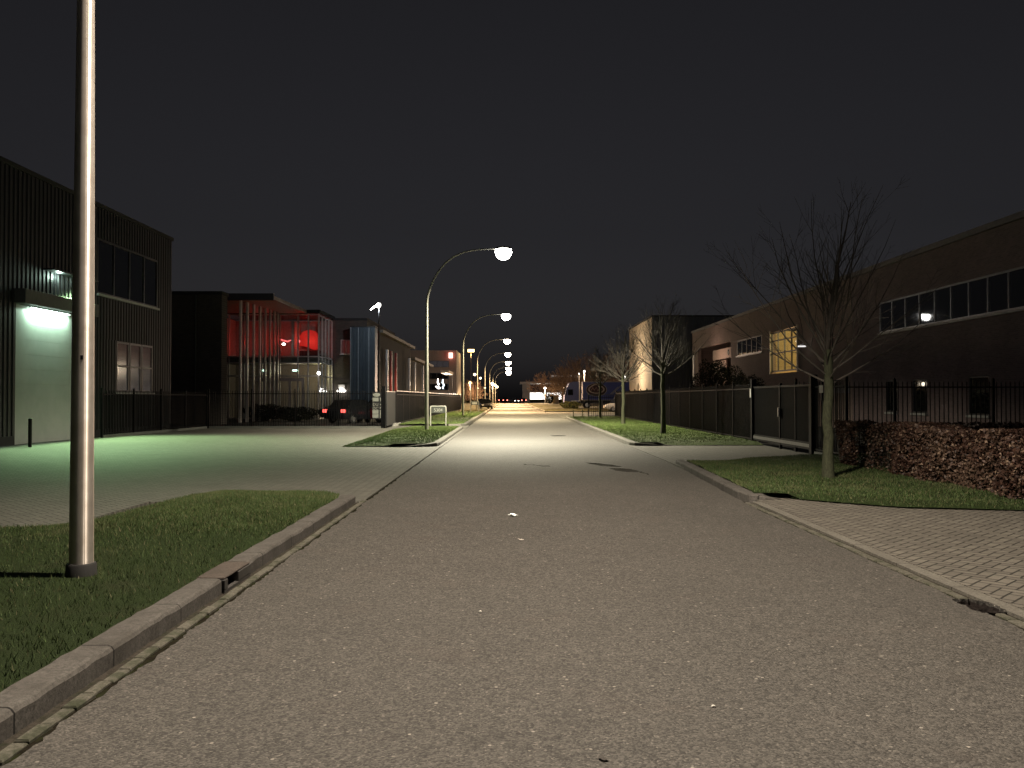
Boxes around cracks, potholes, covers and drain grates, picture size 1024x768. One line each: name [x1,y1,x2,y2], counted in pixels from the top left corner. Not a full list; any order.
pothole [952,599,1007,616]
drain grate [197,562,251,594]
